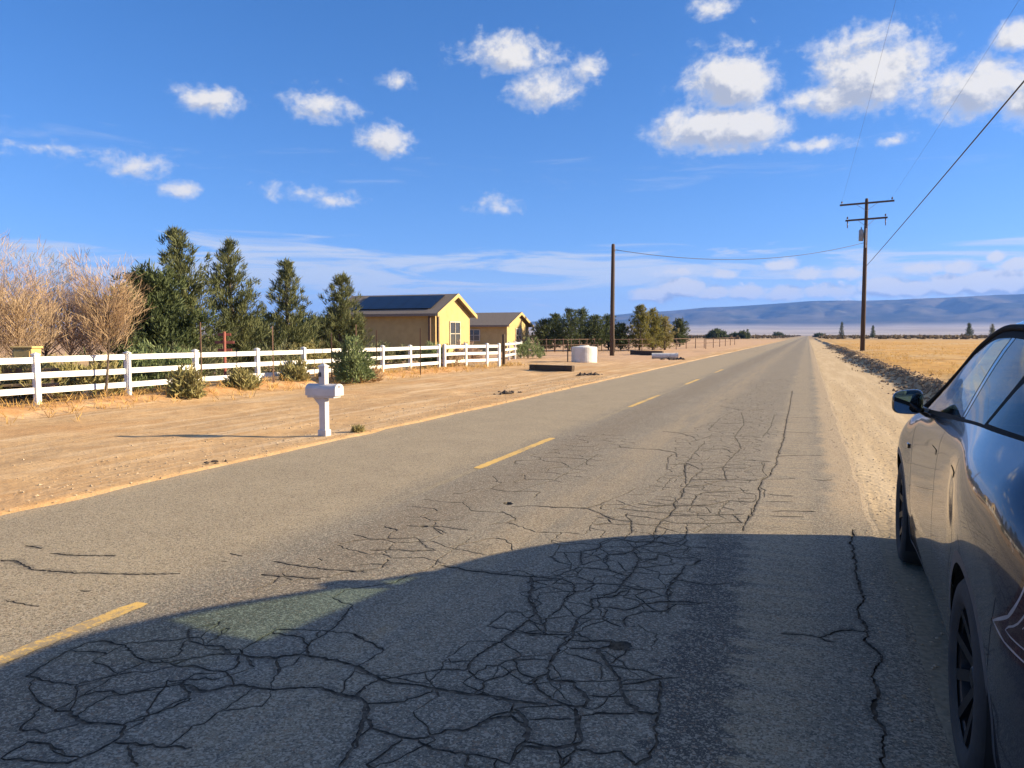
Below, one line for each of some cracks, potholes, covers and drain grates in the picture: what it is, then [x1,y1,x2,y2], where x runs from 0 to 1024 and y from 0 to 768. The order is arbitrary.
pothole [608,641,632,651]
crack [781,529,893,768]
crack [0,379,822,768]
